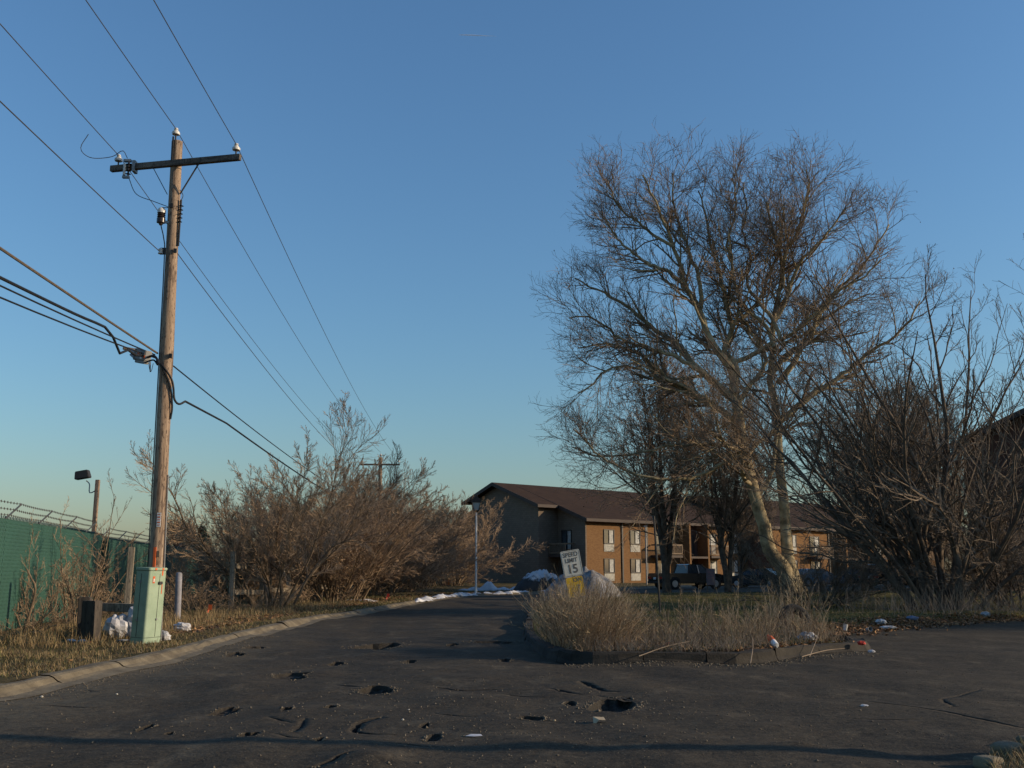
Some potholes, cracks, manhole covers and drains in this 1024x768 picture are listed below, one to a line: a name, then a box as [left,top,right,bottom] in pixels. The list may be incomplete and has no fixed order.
pothole [352,642,403,650]
pothole [421,733,446,743]
pothole [271,671,312,680]
pothole [586,698,639,713]
pothole [355,685,400,696]
pothole [204,706,246,717]
pothole [344,716,397,737]
pothole [133,723,158,734]
crack [852,690,1024,730]
